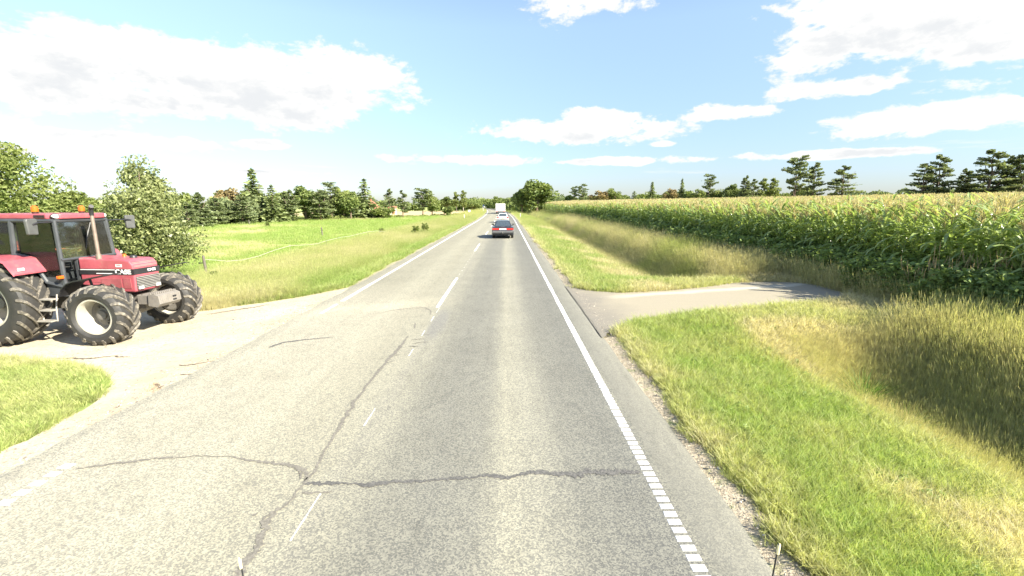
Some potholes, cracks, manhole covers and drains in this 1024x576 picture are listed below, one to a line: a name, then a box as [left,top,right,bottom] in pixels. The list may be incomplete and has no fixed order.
crack [78,307,640,576]
